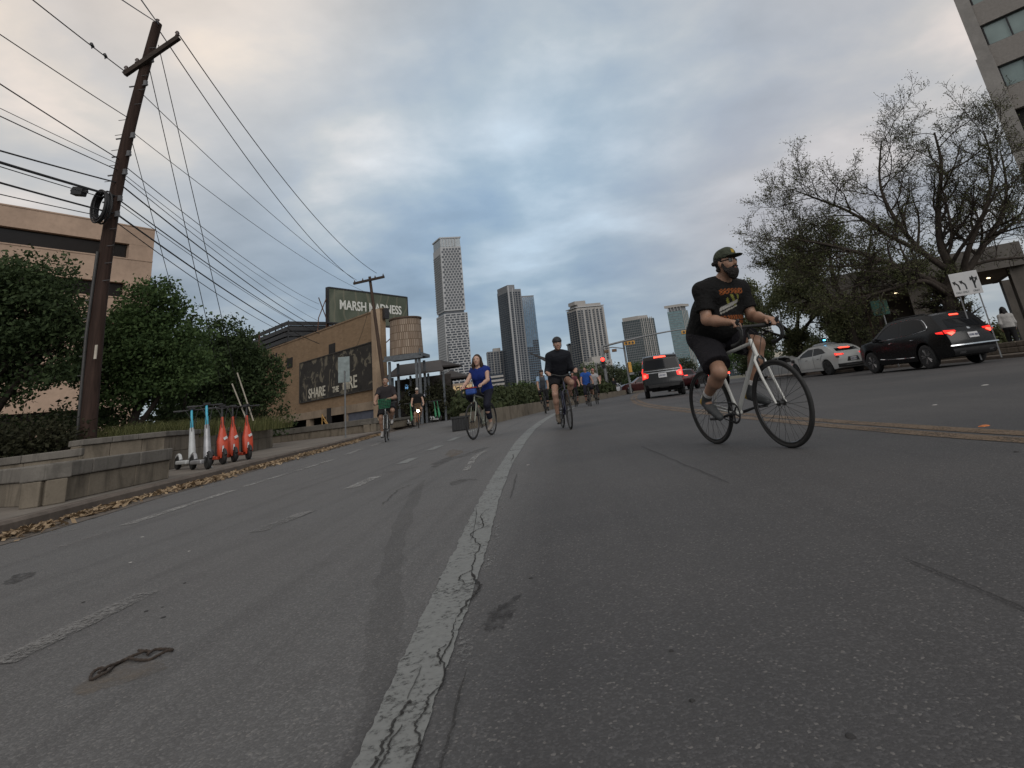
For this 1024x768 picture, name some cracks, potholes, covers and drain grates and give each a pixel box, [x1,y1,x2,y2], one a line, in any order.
crack [370,509,487,768]
